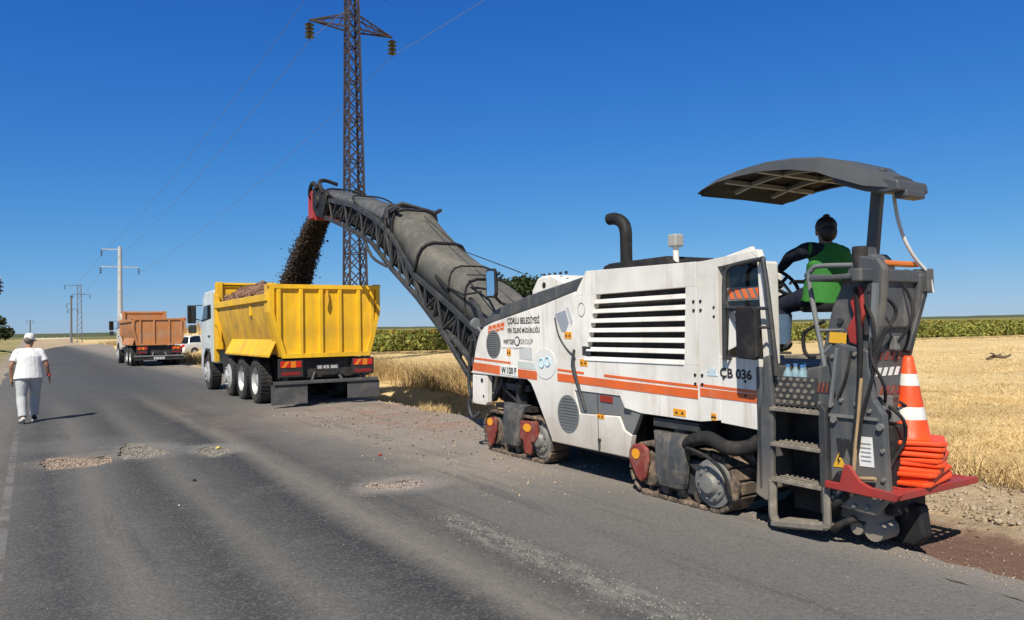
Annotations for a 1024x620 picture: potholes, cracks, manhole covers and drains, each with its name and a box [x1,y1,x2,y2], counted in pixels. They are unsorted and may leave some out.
pothole [117,443,169,460]
pothole [197,446,233,457]
pothole [39,455,114,470]
pothole [362,479,423,490]
